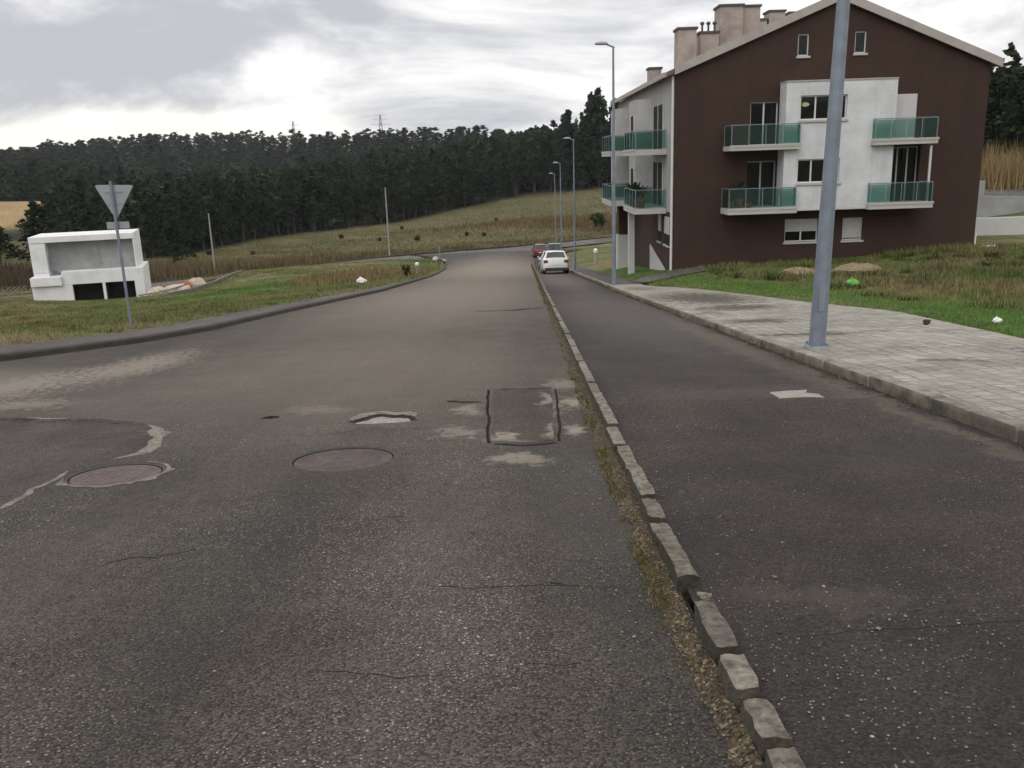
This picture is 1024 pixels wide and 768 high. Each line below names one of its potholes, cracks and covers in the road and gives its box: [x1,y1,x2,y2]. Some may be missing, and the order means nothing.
manhole cover [289,446,397,471]
crack [102,548,197,566]
pothole [348,411,418,424]
manhole cover [55,461,174,488]
crack [317,669,444,679]
crack [801,620,1024,638]
